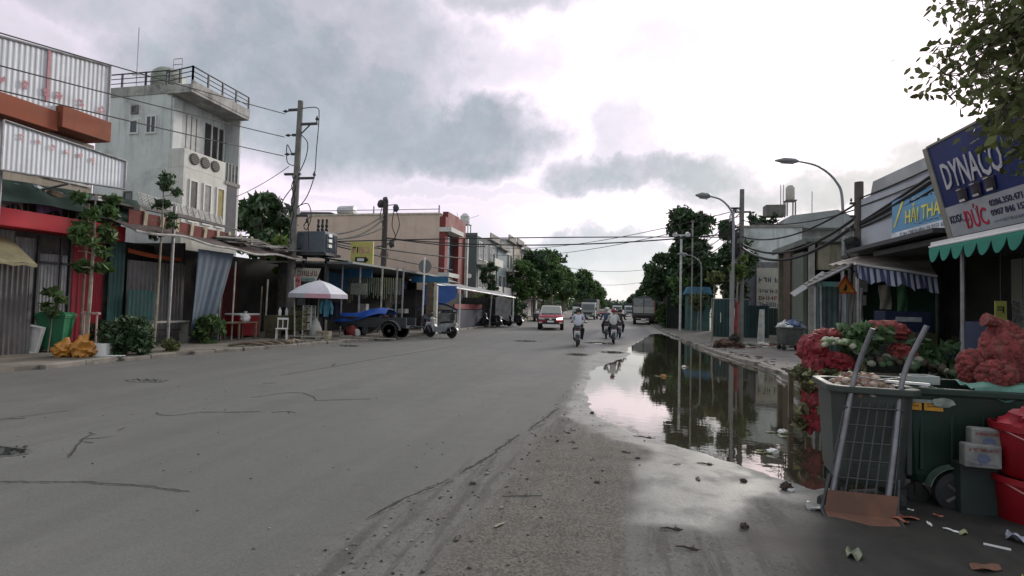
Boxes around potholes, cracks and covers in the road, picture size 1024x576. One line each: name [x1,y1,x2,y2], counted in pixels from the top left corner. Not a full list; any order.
crack [0,481,187,492]
crack [366,408,560,520]
crack [156,392,357,416]
pothole [0,445,32,458]
crack [0,409,126,458]
